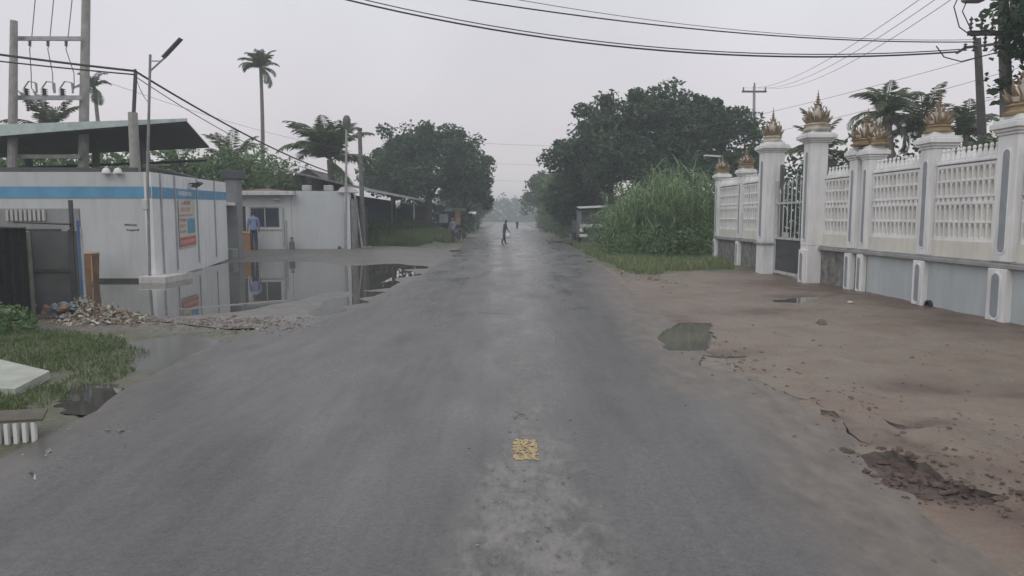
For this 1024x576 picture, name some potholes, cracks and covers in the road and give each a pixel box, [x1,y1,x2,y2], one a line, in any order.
pothole [839,444,1024,514]
pothole [658,322,716,351]
